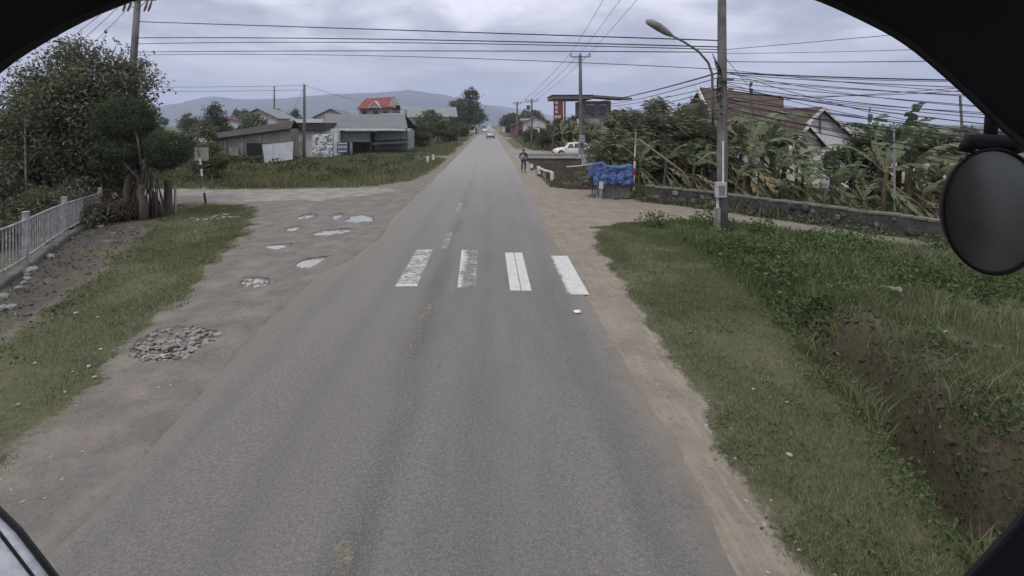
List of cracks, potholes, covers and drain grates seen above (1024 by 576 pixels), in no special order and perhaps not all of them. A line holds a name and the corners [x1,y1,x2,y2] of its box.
pothole [231,275,278,291]
pothole [257,242,299,251]
pothole [329,212,348,221]
pothole [334,213,380,224]
pothole [110,321,237,372]
pothole [292,212,322,221]
pothole [288,253,338,271]
pothole [303,227,359,237]
